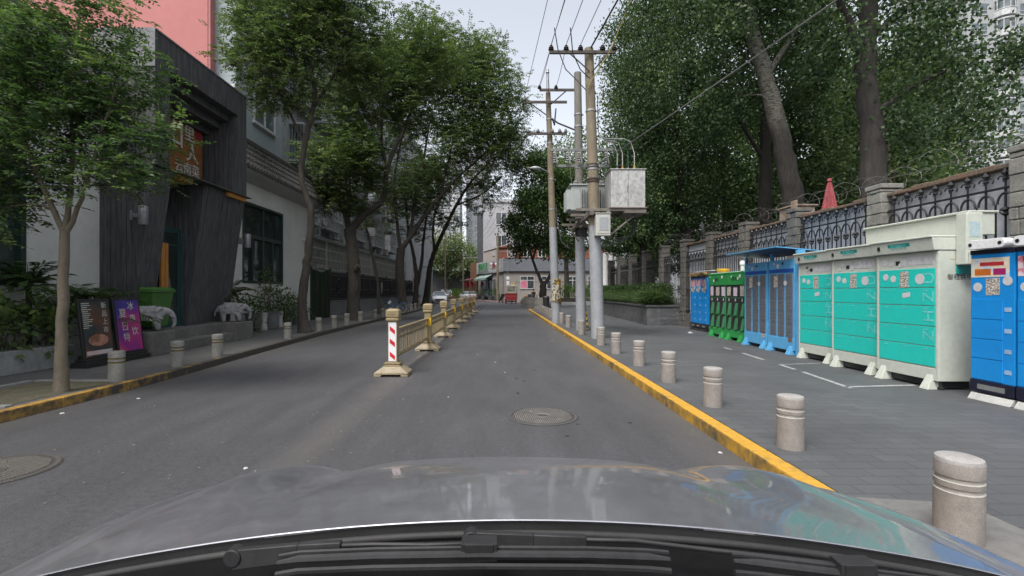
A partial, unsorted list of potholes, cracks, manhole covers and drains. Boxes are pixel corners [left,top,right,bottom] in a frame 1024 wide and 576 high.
manhole cover [0,454,64,484]
manhole cover [508,407,579,426]
